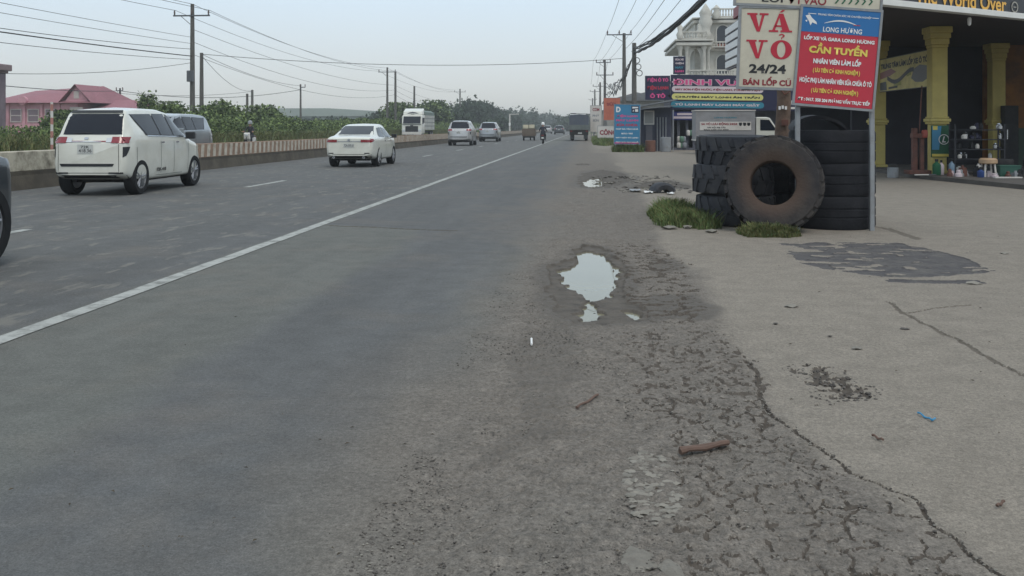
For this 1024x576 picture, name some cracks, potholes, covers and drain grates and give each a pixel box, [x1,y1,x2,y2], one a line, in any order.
pothole [543,244,651,326]
pothole [576,170,635,188]
pothole [629,180,692,189]
crack [611,243,1006,576]
